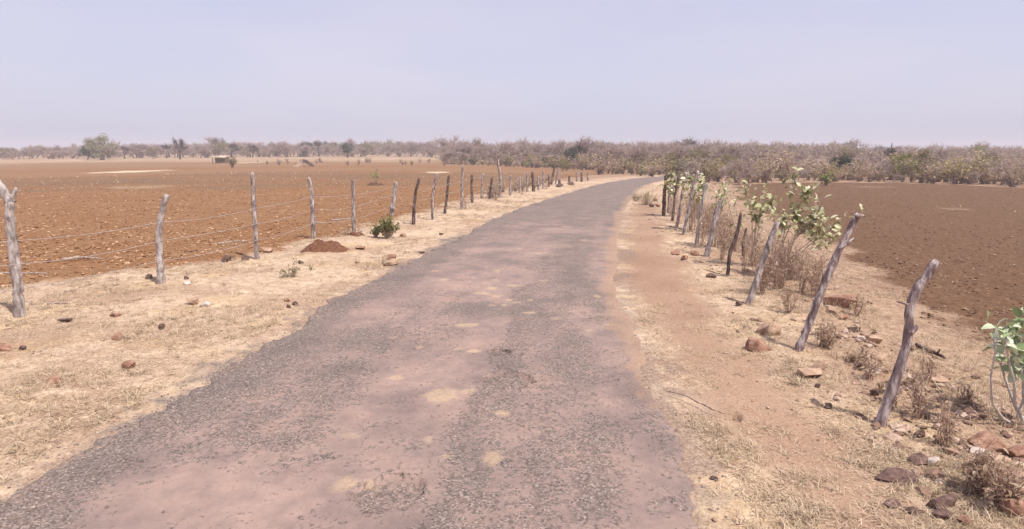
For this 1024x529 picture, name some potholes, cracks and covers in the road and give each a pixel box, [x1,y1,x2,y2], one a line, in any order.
pothole [346,472,431,513]
pothole [480,369,539,391]
